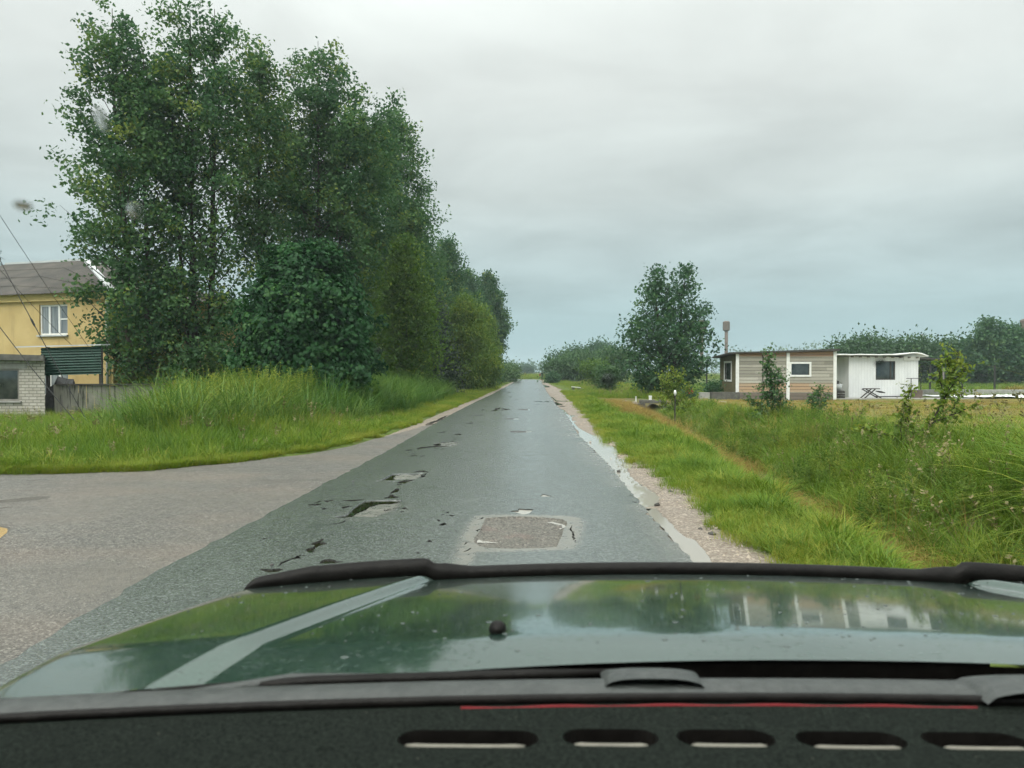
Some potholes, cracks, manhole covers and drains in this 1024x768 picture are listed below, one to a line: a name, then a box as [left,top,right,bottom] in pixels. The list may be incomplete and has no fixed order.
pothole [305,538,327,553]
pothole [335,500,406,519]
